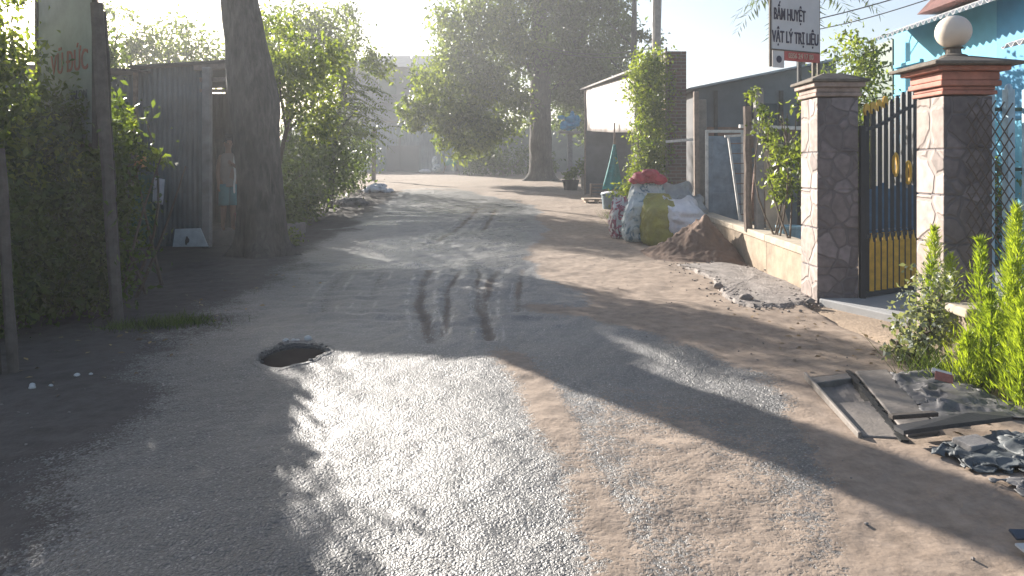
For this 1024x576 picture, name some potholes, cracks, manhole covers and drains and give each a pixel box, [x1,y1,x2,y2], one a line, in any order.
pothole [250,339,336,372]
